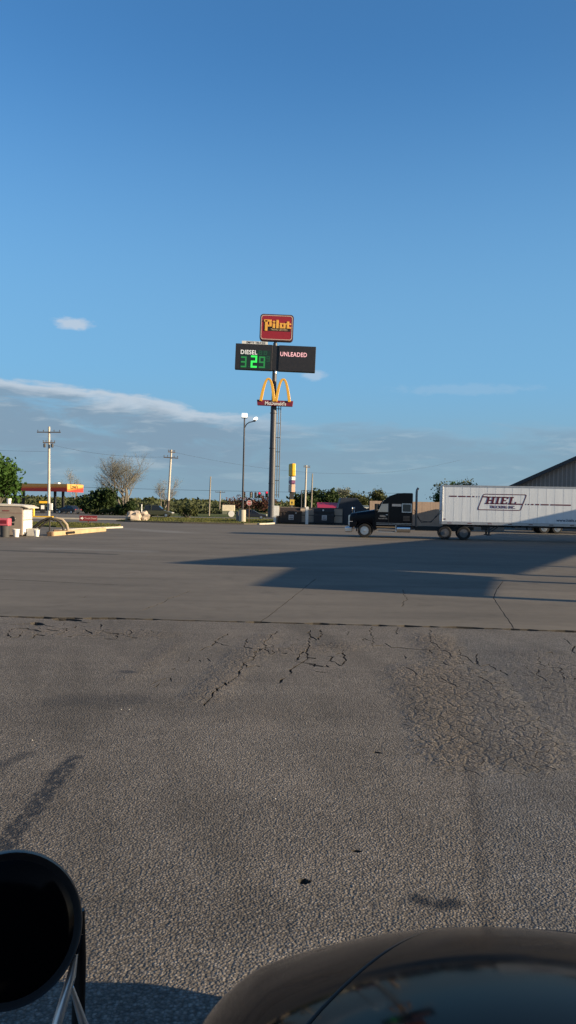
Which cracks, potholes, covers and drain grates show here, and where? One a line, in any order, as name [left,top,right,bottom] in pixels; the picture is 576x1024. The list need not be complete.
crack [152,627,576,778]
